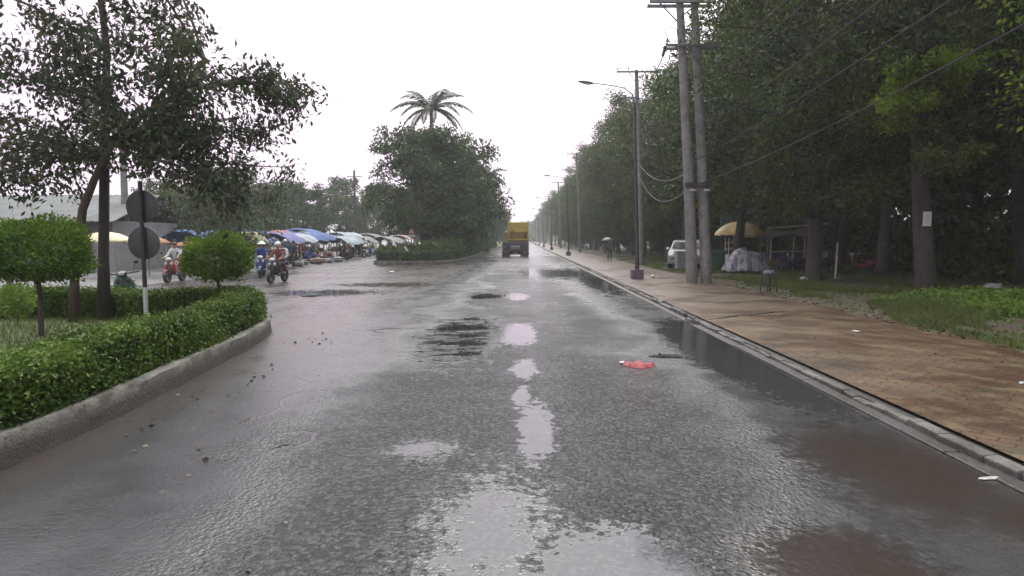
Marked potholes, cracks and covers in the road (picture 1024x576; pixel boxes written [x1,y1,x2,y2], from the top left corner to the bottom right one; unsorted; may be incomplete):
crack [706,311,785,321]
crack [238,375,339,450]
